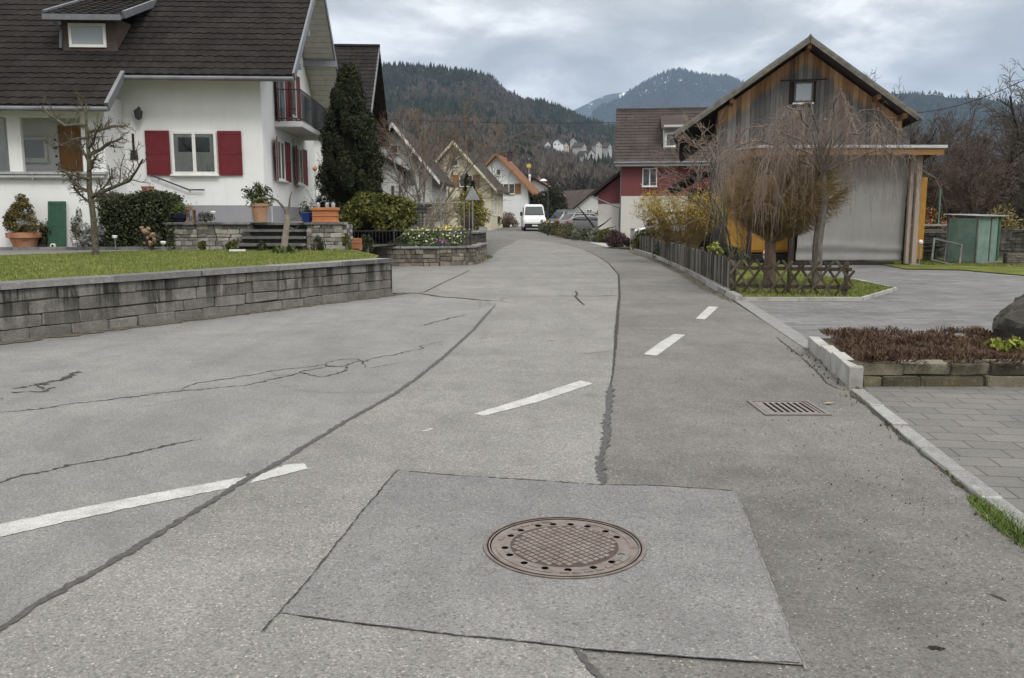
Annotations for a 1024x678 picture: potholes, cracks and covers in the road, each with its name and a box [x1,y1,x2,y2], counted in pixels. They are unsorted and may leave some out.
crack [1,270,617,412]
drain grate [747,400,832,416]
manhole cover [483,516,646,579]
crack [0,439,200,483]
